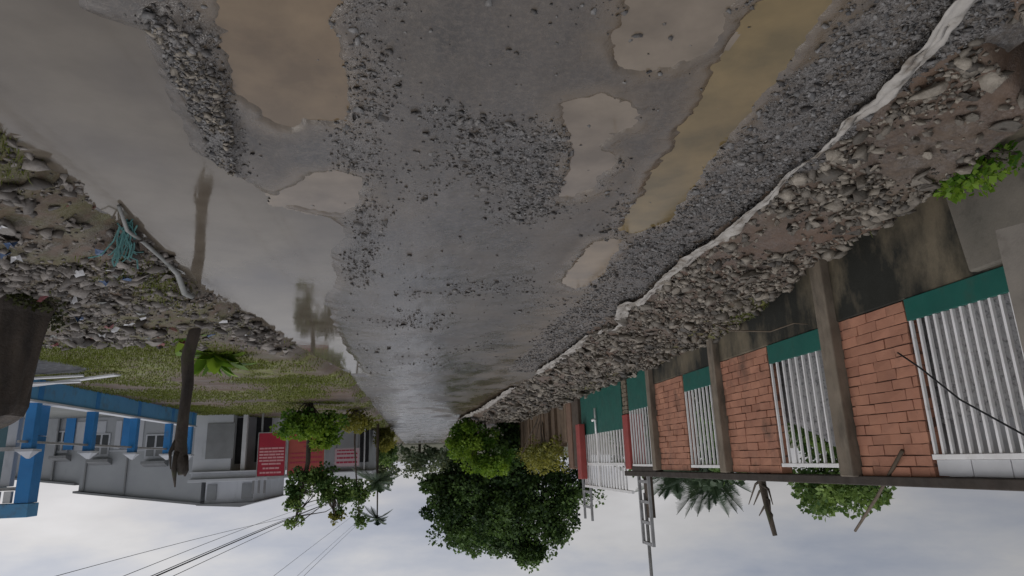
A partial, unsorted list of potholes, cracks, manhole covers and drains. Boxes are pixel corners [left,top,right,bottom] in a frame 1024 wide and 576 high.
pothole [191,0,367,138]
pothole [265,165,379,218]
pothole [543,87,652,205]
pothole [607,0,846,238]
pothole [554,236,641,293]
